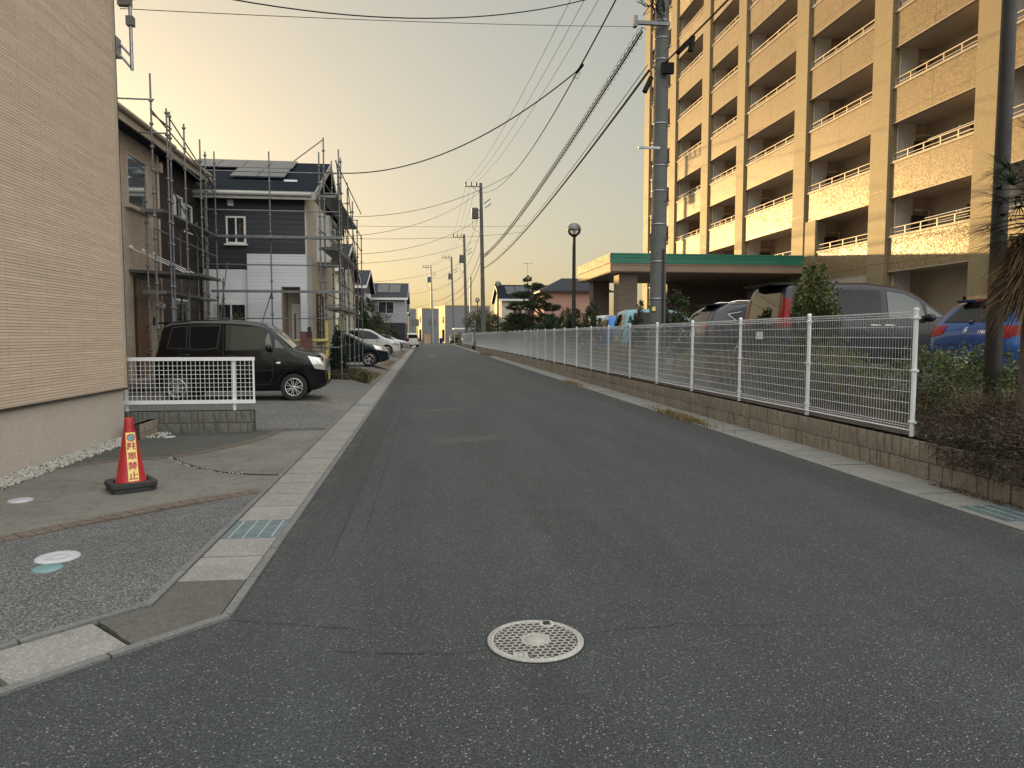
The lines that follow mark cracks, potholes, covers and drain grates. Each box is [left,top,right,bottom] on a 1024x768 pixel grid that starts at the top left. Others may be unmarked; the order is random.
crack [232,619,487,654]
manhole cover [485,620,586,663]
crack [584,622,872,635]
drain grate [221,520,290,539]
drain grate [961,504,1024,522]
